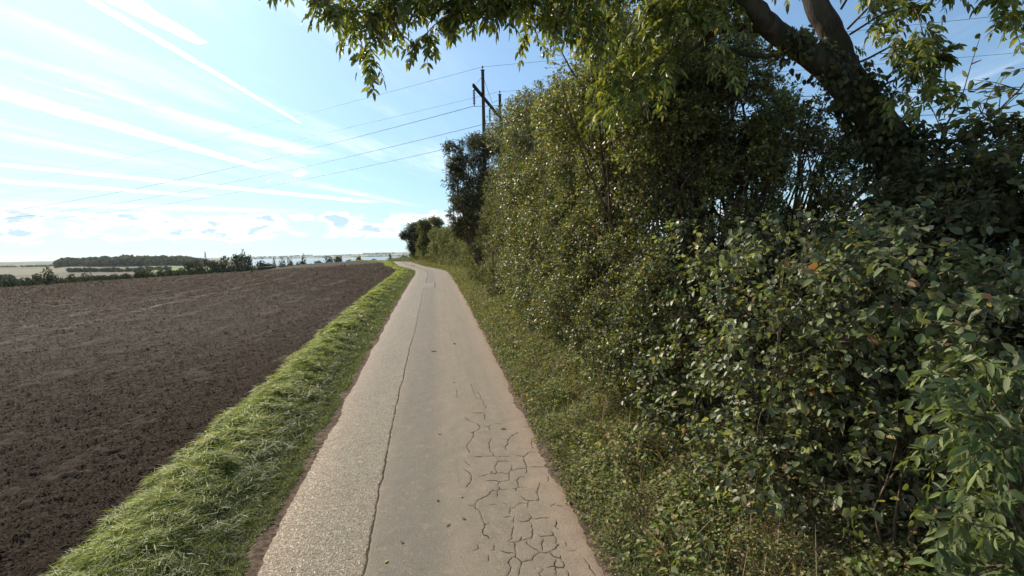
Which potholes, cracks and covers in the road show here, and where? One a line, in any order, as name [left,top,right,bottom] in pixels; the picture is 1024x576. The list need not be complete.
crack [465,418,569,576]
